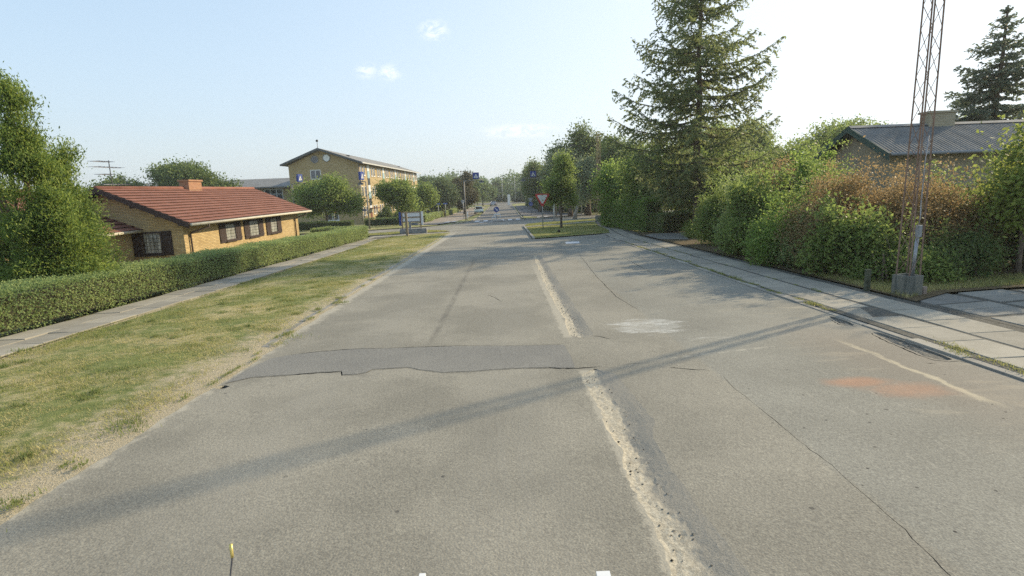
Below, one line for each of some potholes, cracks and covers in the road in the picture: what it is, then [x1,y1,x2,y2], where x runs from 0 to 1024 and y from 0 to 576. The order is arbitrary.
pothole [873,332,951,361]
